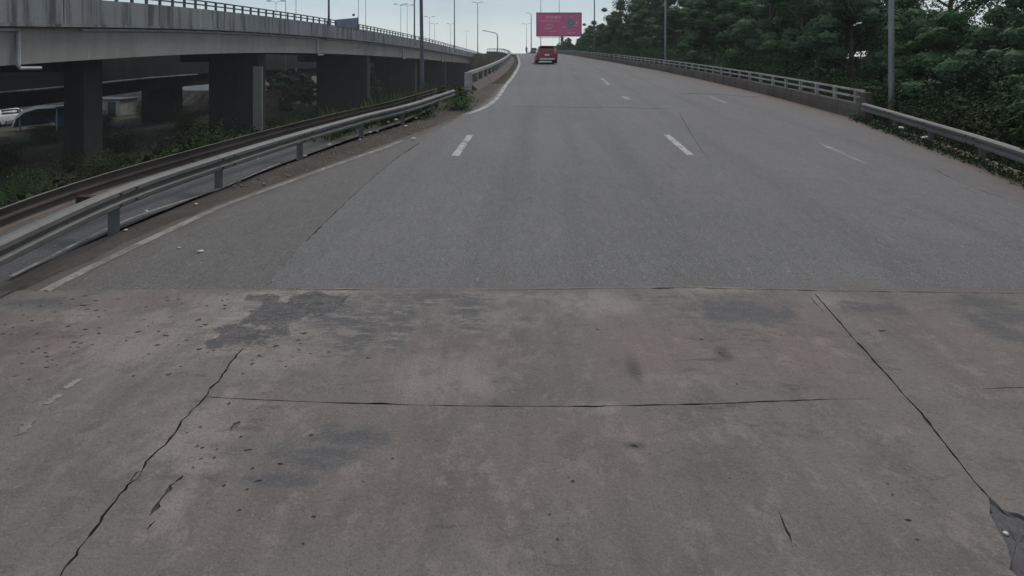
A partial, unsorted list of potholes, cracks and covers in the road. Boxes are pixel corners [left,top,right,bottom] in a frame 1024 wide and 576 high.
pothole [989,497,1024,576]
crack [60,348,827,576]
crack [339,288,1024,499]
crack [307,144,418,240]
